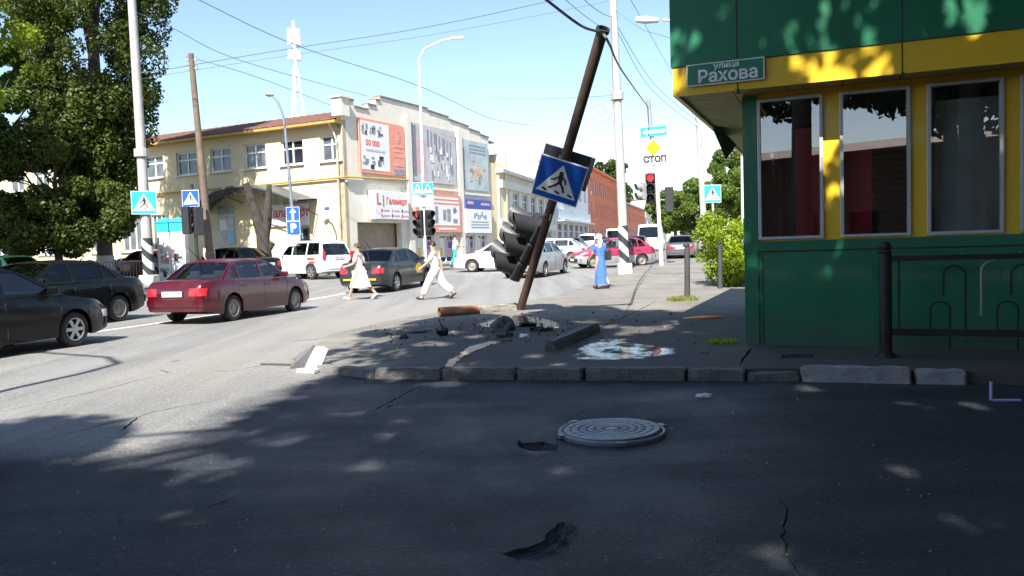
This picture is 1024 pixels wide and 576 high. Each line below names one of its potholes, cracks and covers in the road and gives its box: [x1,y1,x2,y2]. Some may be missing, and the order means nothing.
crack [779,498,801,576]
crack [44,398,224,440]
pothole [517,440,559,452]
pothole [503,522,581,561]
manhole cover [556,418,666,447]
crack [740,348,854,364]
